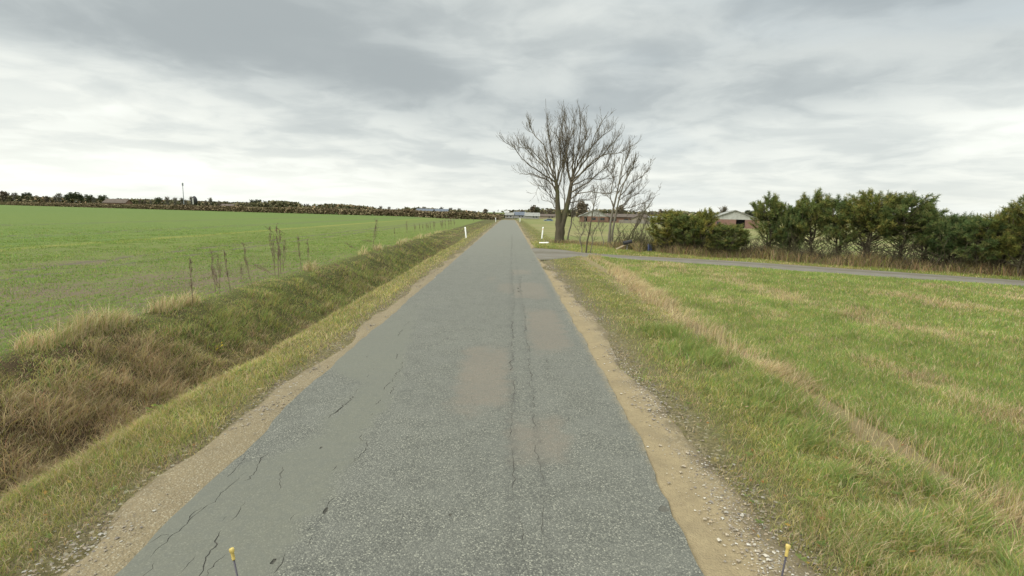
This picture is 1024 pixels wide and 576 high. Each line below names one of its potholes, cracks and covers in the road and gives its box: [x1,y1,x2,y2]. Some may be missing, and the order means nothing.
crack [508,238,549,576]
crack [330,354,403,416]
crack [143,452,284,576]
